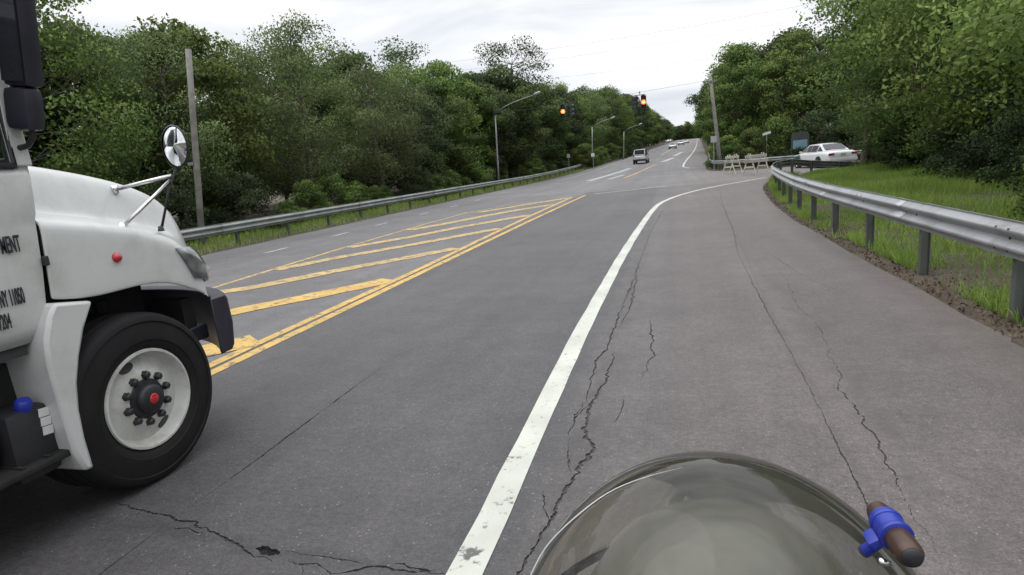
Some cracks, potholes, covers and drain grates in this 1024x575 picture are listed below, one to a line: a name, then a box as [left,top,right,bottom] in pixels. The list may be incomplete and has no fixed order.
pothole [256,545,280,556]
crack [720,193,941,560]
crack [516,210,663,575]
crack [98,374,444,575]
